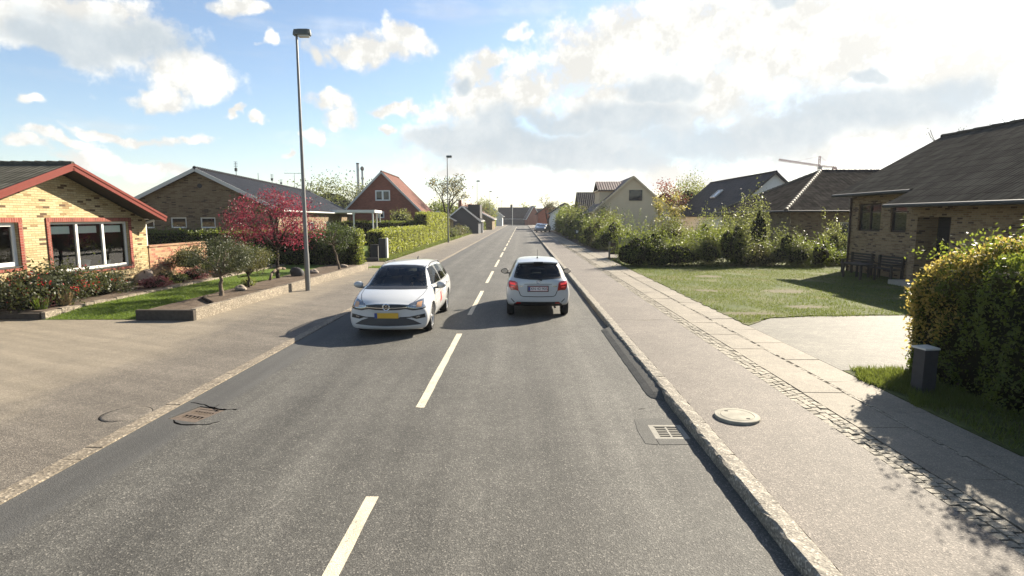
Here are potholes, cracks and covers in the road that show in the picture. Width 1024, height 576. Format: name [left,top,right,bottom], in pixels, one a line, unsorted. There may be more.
manhole cover [714,408,760,426]
manhole cover [98,407,153,422]
drain grate [648,425,690,439]
drain grate [171,407,224,423]
crack [173,403,237,425]
